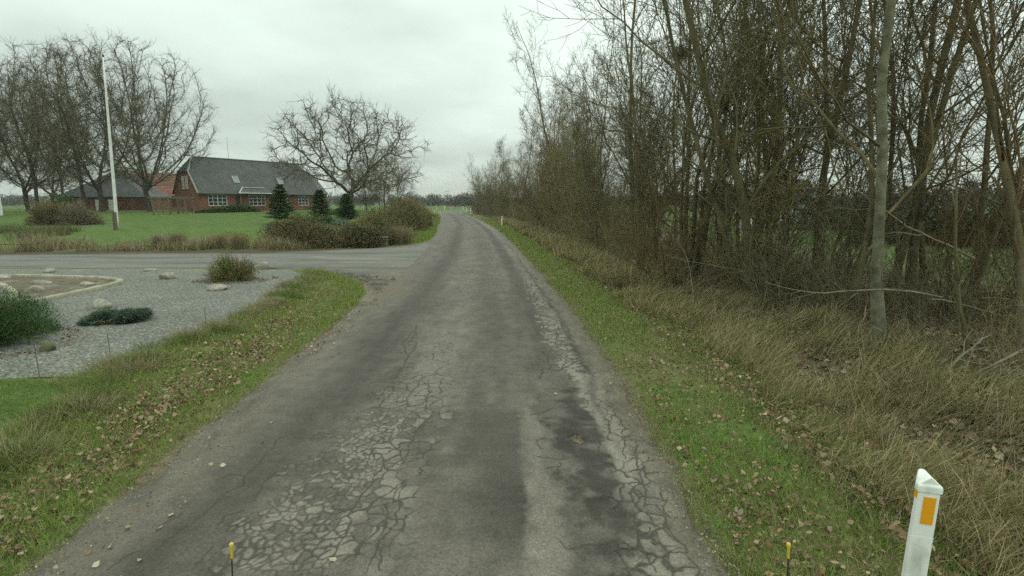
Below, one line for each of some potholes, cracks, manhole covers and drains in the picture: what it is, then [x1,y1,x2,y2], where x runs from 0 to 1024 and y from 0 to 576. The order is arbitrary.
crack [214,324,467,576]
crack [523,274,700,576]
